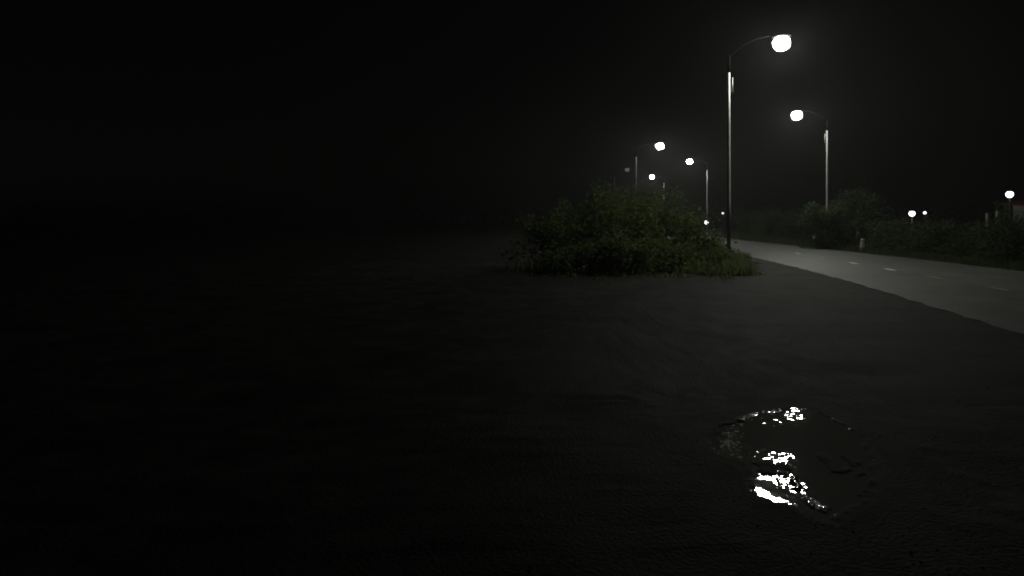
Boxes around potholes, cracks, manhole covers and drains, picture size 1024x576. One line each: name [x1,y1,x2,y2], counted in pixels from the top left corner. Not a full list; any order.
pothole [702,403,887,528]
